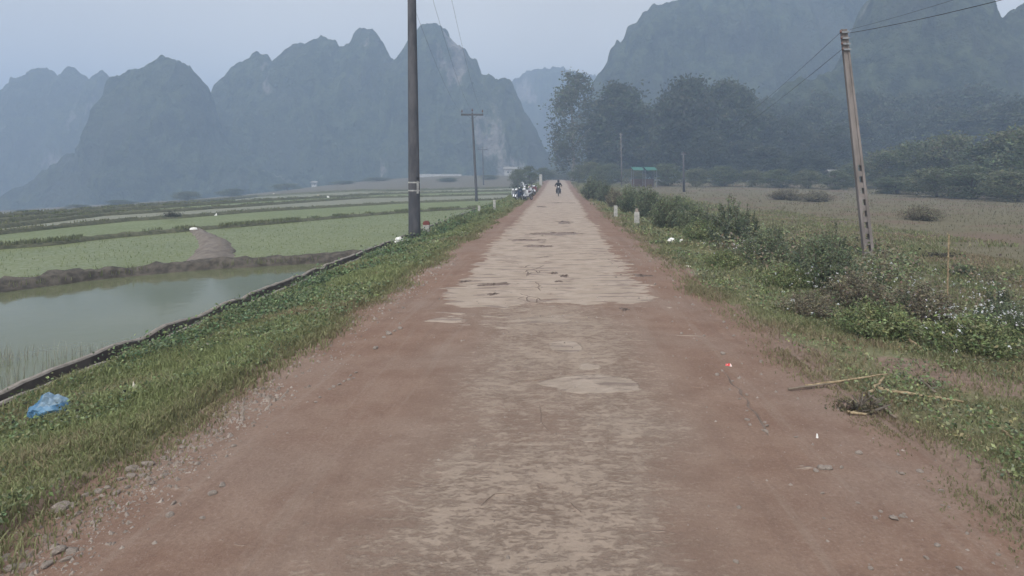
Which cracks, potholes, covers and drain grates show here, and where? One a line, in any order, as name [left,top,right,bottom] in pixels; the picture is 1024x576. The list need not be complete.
crack [500,256,637,307]
crack [704,350,769,436]
